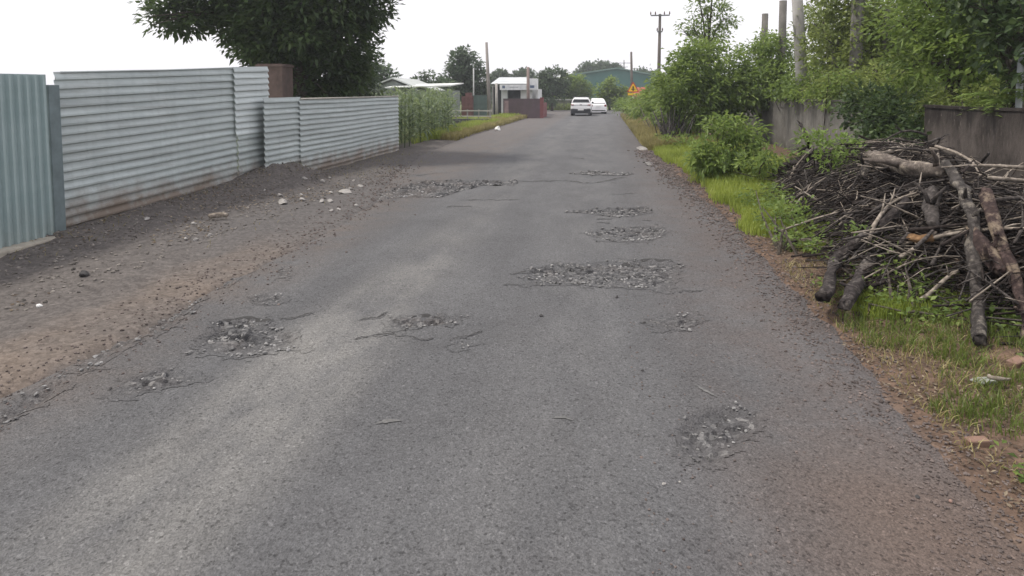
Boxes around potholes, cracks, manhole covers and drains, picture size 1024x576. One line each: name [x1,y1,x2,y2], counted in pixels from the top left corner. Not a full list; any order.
crack [355,312,482,341]
pothole [640,310,710,333]
pothole [377,179,519,202]
pothole [235,293,291,307]
pothole [98,367,214,401]
pothole [564,206,654,218]
pothole [185,314,315,362]
pothole [381,312,473,332]
pothole [518,258,686,294]
pothole [579,224,671,243]
crack [221,296,313,326]
